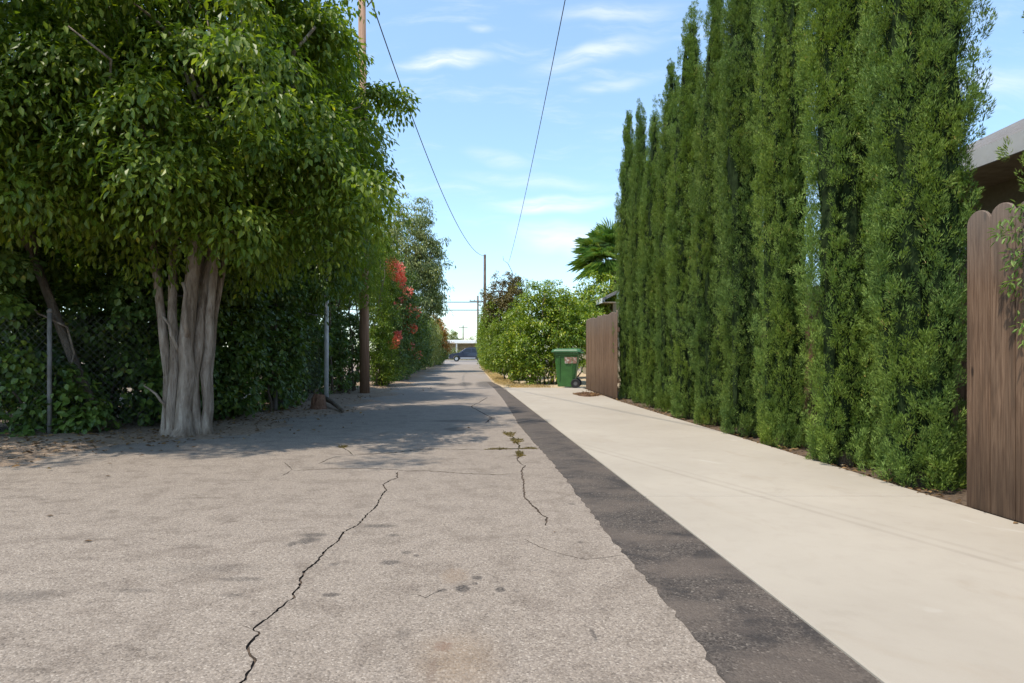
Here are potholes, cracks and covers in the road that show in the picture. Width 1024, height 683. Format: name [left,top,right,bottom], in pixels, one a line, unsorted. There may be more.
crack [239,436,619,683]
